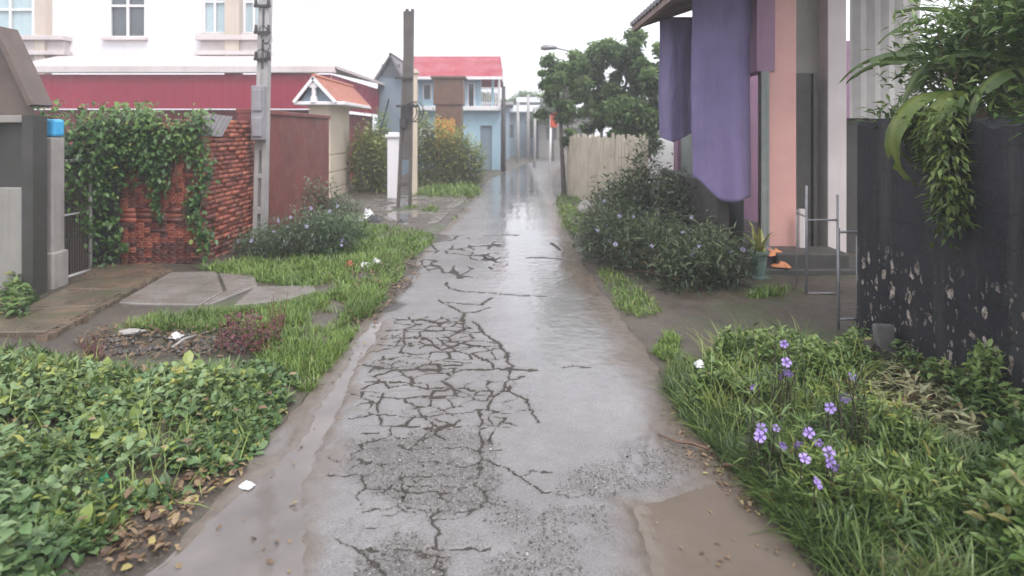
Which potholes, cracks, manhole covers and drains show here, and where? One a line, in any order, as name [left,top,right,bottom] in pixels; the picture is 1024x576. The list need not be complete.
crack [327,235,585,576]
